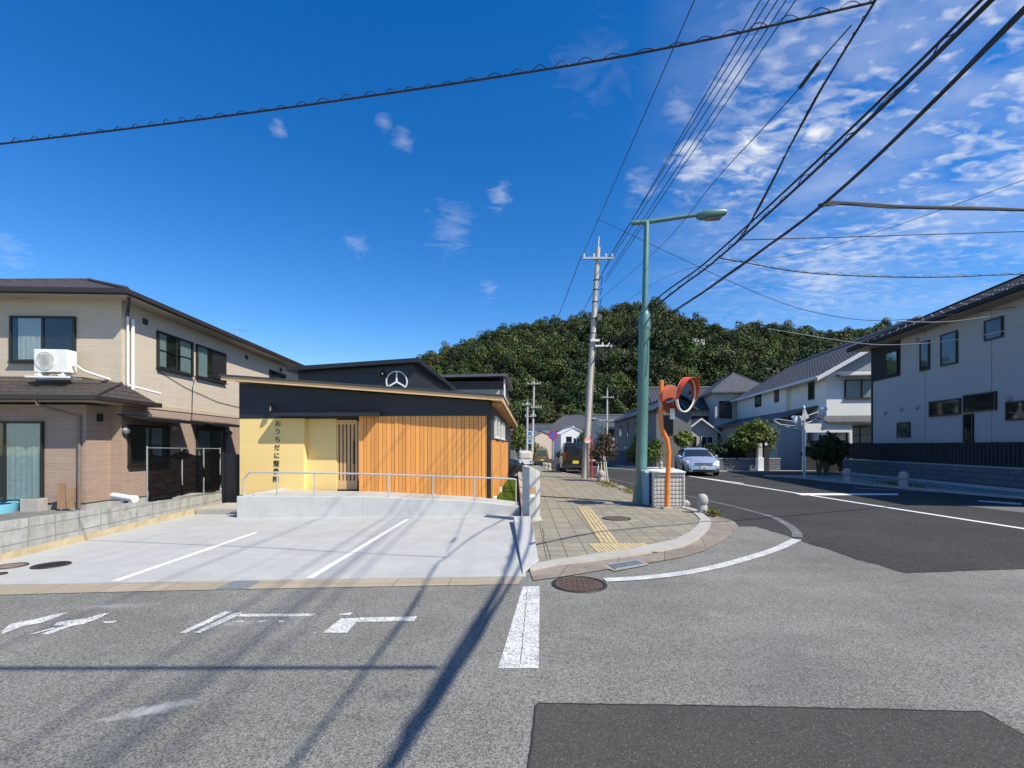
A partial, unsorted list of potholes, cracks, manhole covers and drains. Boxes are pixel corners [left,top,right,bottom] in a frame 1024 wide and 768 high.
manhole cover [29,561,72,570]
manhole cover [551,576,608,593]
manhole cover [0,562,29,570]
drain grate [608,560,647,569]
